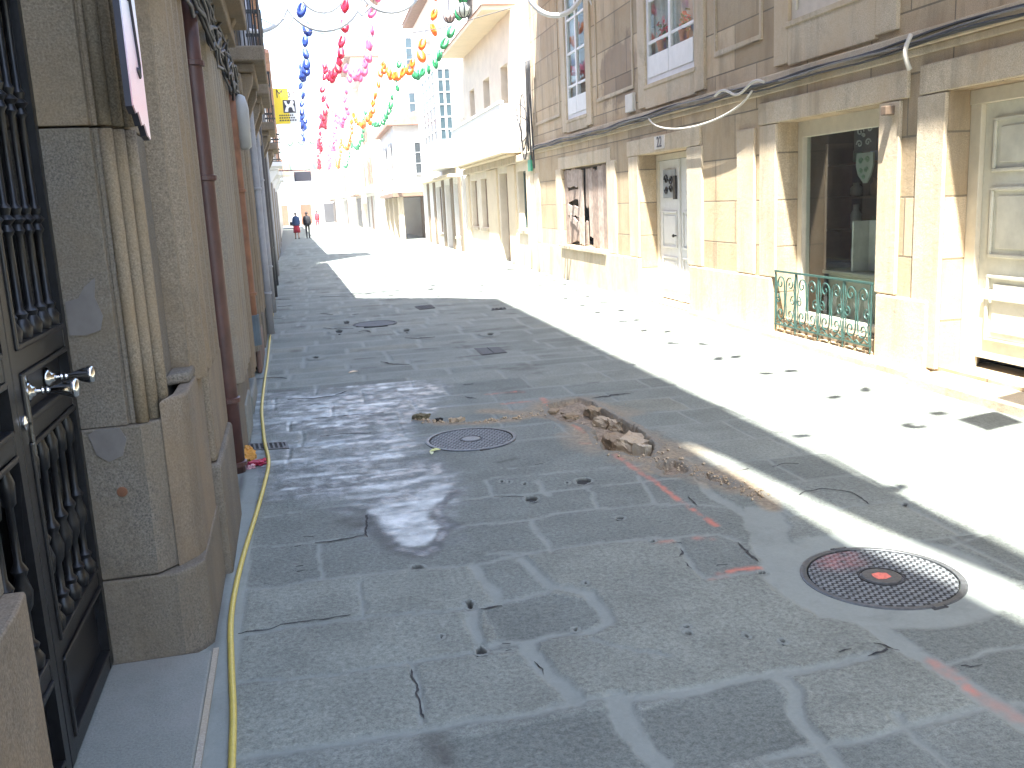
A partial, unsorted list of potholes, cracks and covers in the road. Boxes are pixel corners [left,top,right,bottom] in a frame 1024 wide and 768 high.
crack [238,615,348,634]
utility cover [474,347,507,355]
drain grate [248,441,289,450]
manhole cover [353,320,397,328]
pothole [542,396,664,458]
manhole cover [800,547,968,610]
crack [294,515,368,547]
crack [410,669,424,718]
manhole cover [425,427,517,452]
